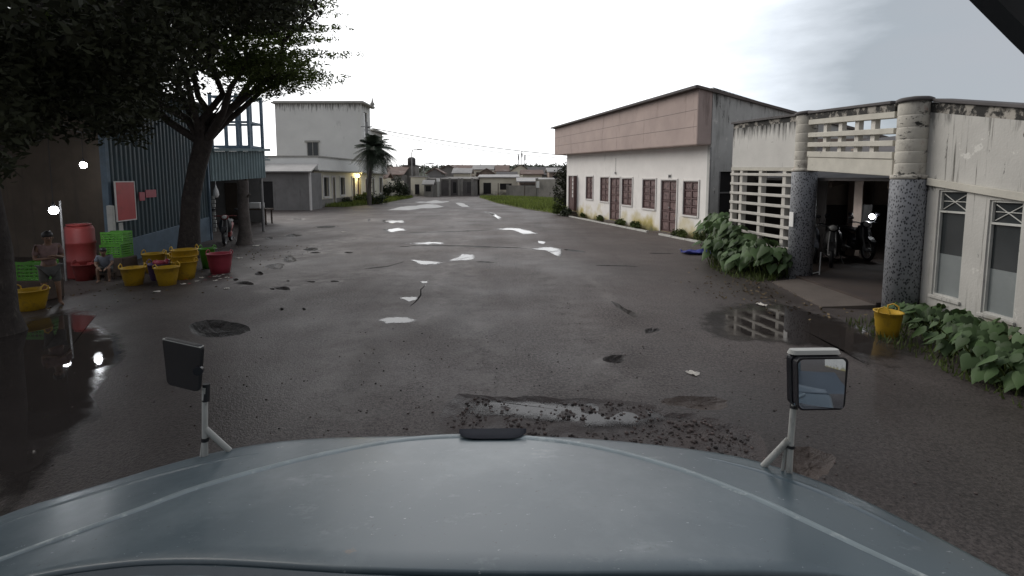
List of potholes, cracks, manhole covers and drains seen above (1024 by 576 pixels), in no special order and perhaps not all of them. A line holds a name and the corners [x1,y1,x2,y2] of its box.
pothole [603,355,626,363]
pothole [189,320,250,337]
pothole [793,446,836,480]
pothole [439,394,768,463]
